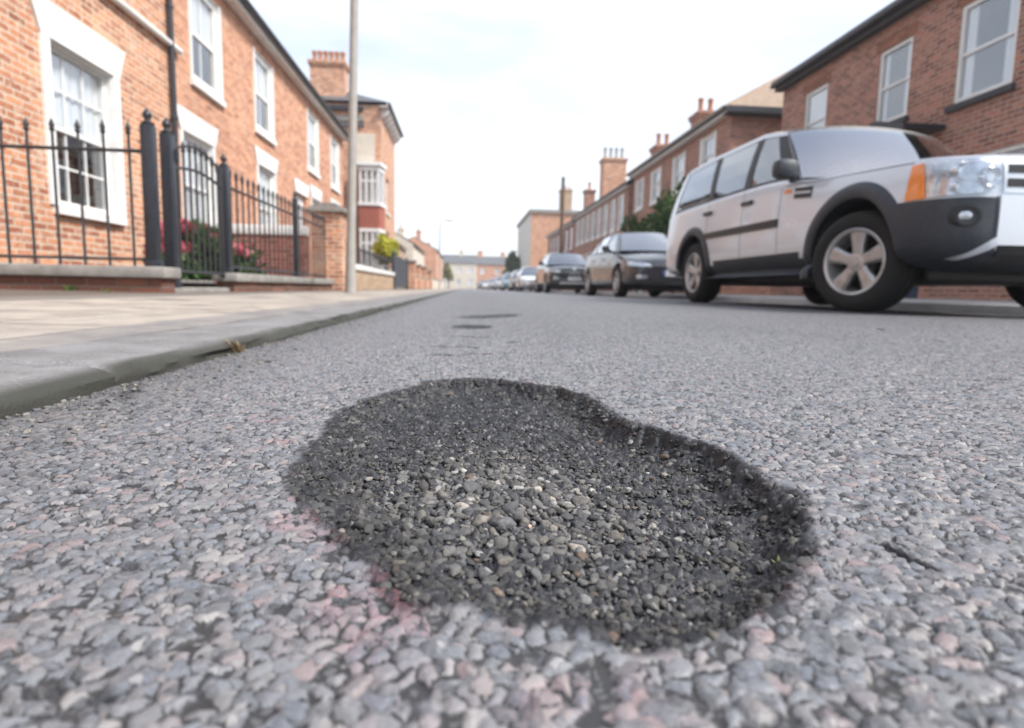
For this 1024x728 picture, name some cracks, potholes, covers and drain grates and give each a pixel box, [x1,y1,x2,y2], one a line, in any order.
pothole [285,378,819,654]
crack [874,543,926,570]
